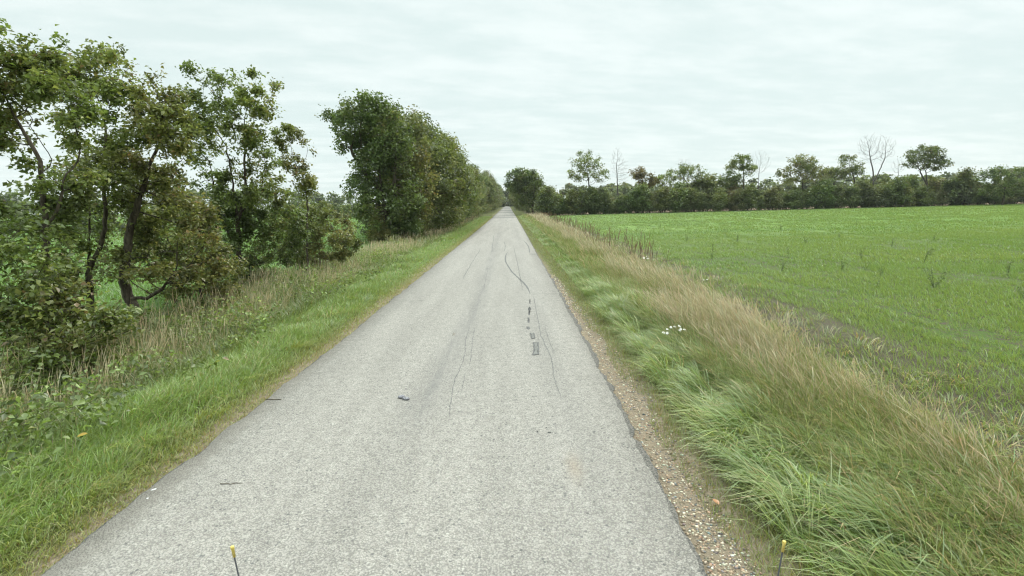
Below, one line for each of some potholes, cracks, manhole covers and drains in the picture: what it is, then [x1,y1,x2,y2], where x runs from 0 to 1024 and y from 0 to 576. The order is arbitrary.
crack [463,238,561,396]
crack [448,326,475,420]
